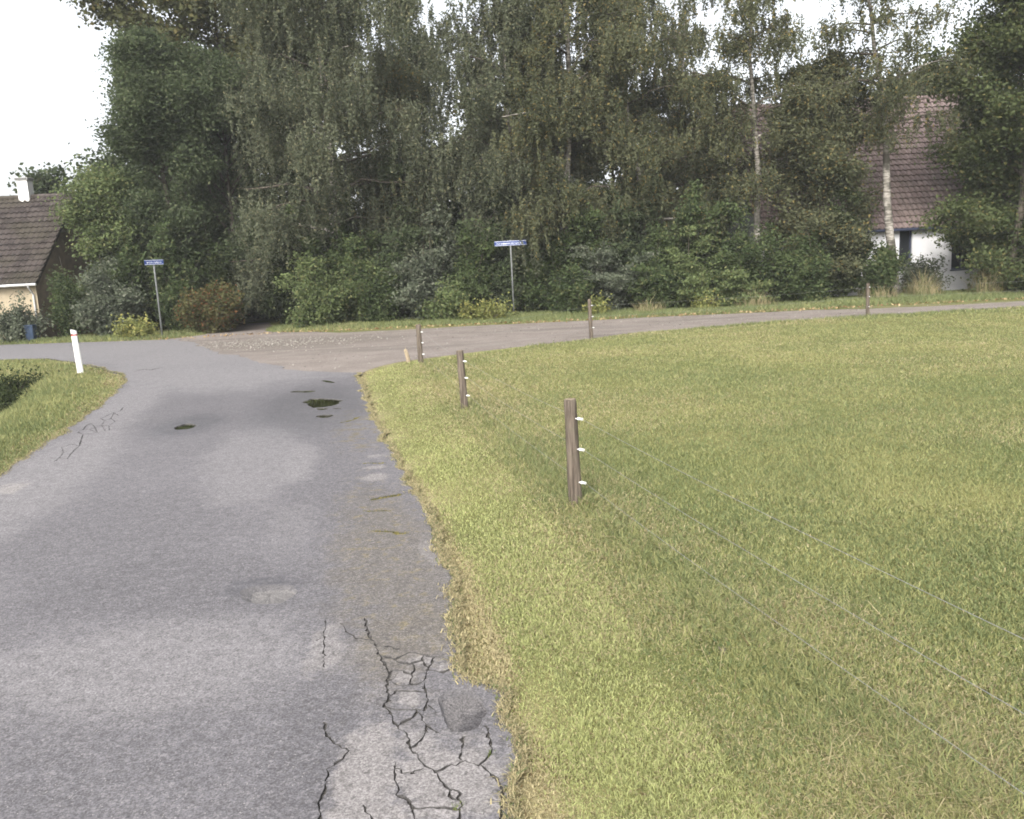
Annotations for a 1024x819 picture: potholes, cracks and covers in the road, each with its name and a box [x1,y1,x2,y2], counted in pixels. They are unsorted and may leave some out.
crack [316,618,505,819]
crack [55,408,123,461]
pothole [438,688,488,732]
